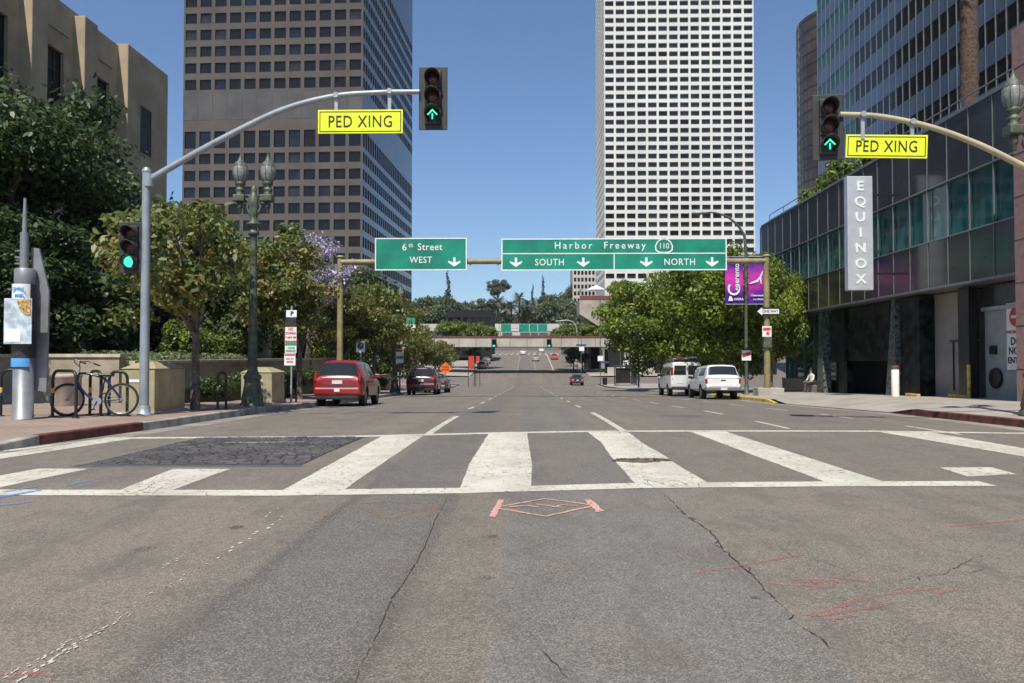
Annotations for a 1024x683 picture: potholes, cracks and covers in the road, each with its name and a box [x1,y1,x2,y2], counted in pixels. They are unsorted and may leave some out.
crack [663,493,828,646]
